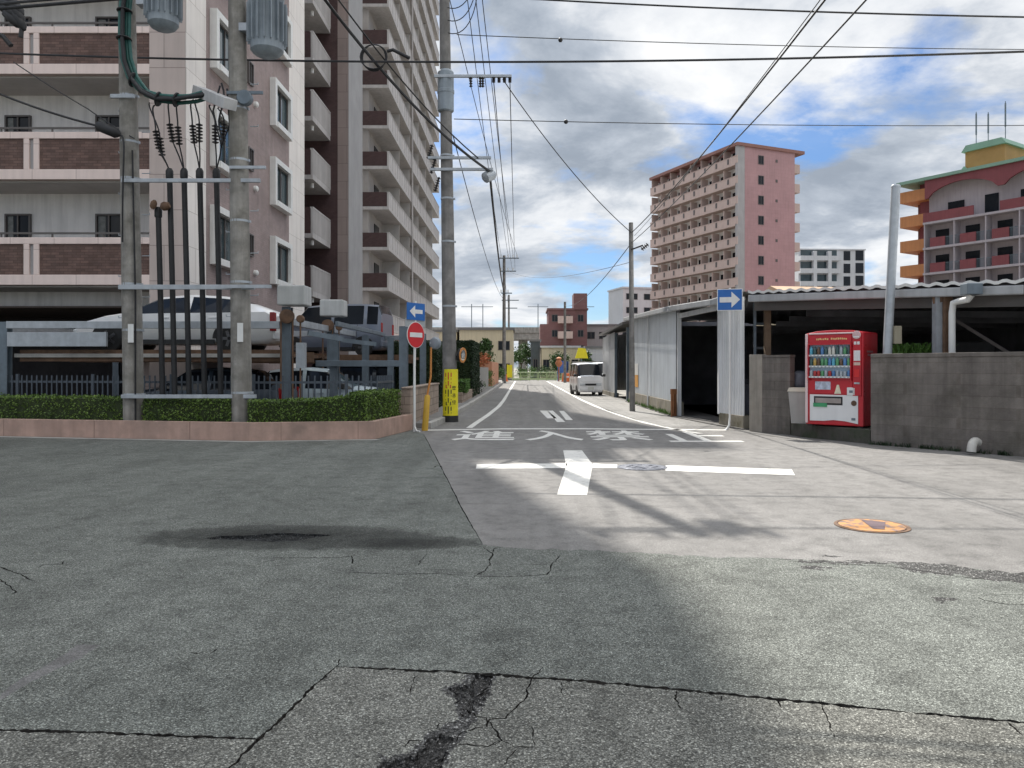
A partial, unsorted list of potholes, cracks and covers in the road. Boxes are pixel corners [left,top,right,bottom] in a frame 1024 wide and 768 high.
manhole cover [834,518,911,534]
crack [0,561,64,595]
pothole [377,734,454,768]
pothole [448,675,494,718]
pothole [204,533,330,542]
crack [266,547,559,577]
crack [405,667,563,764]
